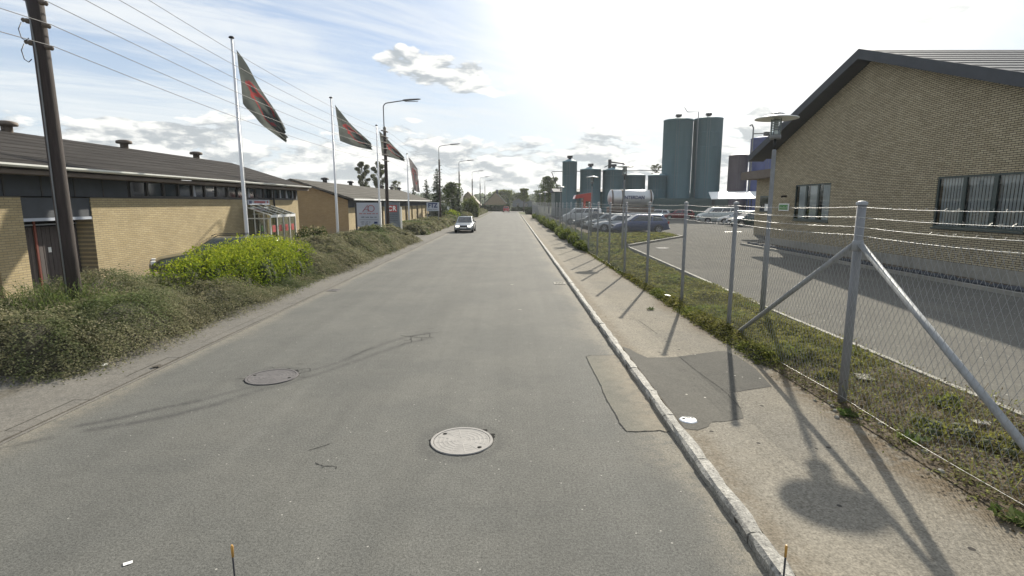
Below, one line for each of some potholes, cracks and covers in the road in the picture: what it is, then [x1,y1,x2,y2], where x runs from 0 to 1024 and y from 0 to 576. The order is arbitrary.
manhole cover [429,427,495,456]
manhole cover [243,368,299,385]
